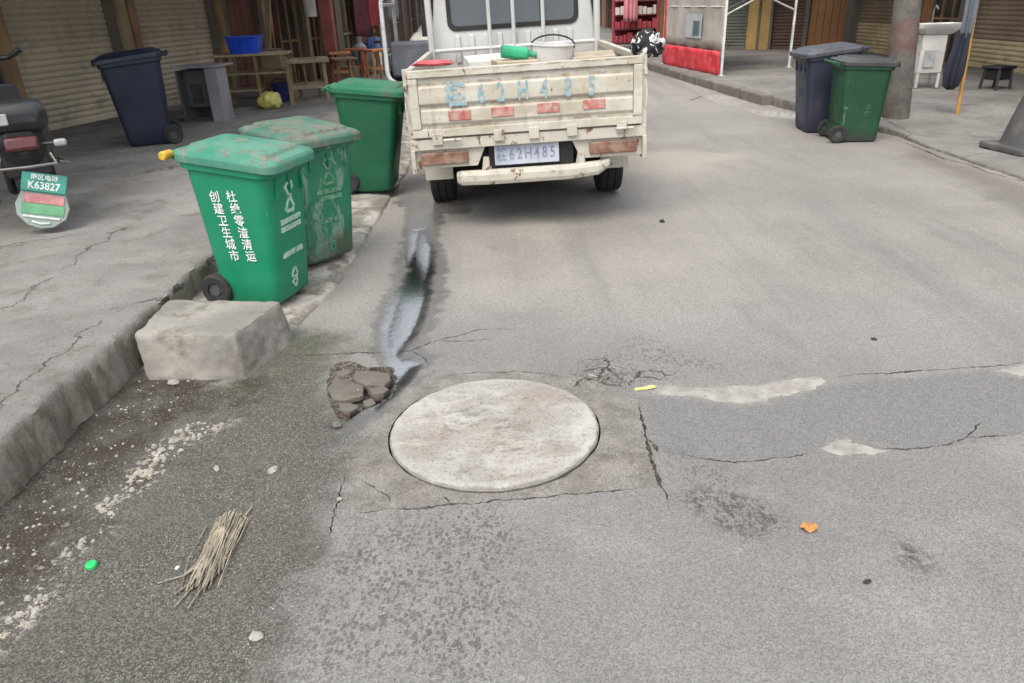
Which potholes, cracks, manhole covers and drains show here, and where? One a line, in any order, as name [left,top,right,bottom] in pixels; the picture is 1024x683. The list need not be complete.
crack [288,328,529,364]
crack [327,402,1017,546]
pothole [326,361,398,423]
manhole cover [388,379,601,493]
crack [463,357,679,387]
